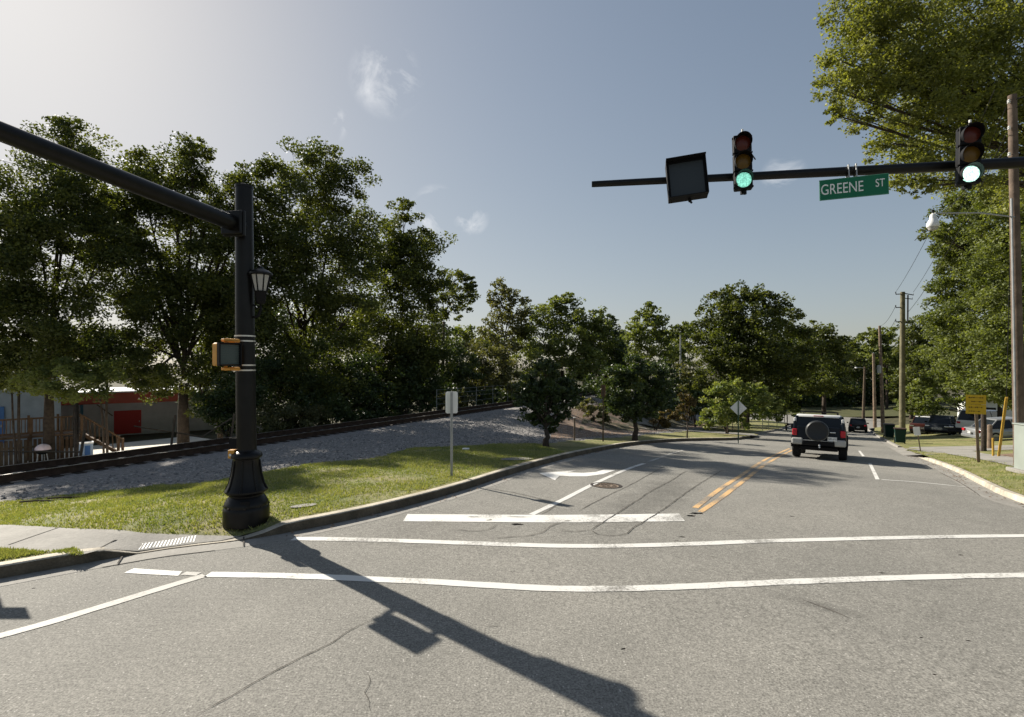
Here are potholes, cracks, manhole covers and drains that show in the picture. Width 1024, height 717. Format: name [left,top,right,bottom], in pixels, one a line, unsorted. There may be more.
crack [194,621,368,716]
crack [454,470,722,538]
